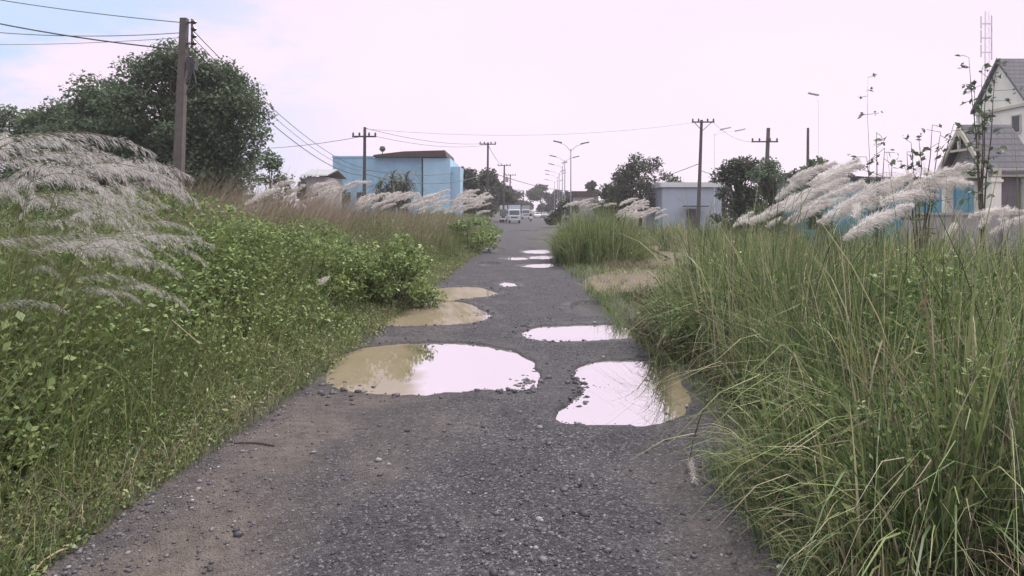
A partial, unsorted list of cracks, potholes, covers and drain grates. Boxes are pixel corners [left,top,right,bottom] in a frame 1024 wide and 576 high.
pothole [550,358,696,426]
pothole [519,322,634,342]
pothole [376,300,495,326]
pothole [431,286,500,302]
pothole [321,340,544,396]
